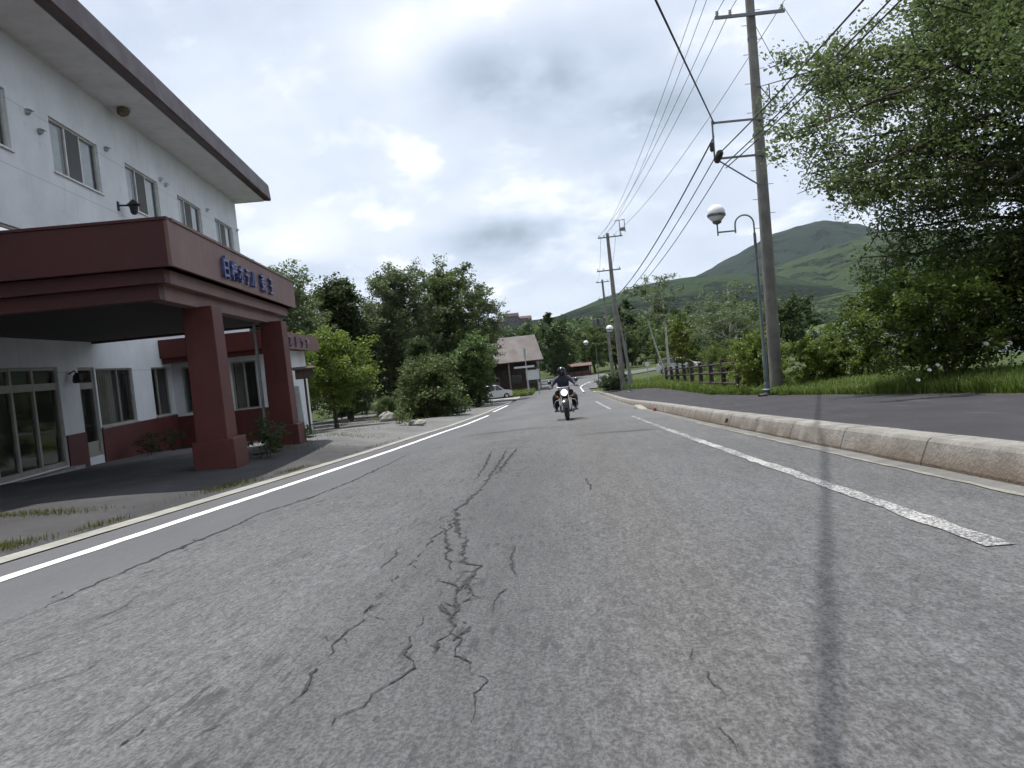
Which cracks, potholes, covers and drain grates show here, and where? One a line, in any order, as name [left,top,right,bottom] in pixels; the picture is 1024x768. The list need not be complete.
crack [262,427,542,731]
